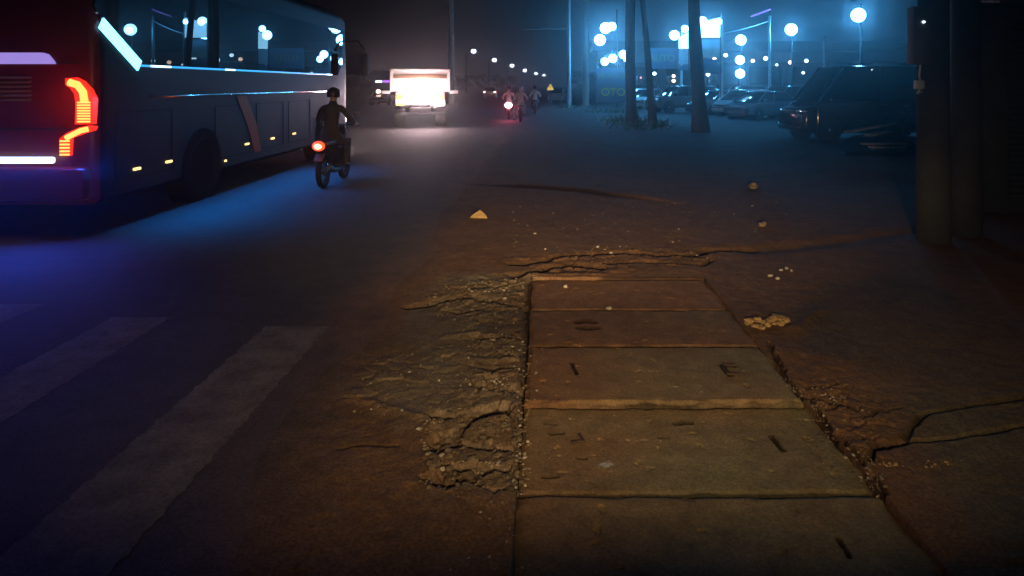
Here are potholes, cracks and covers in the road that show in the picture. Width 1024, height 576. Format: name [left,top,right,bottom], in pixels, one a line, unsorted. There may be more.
pothole [417,400,522,499]
crack [764,340,1024,499]
crack [398,246,760,502]
crack [336,441,403,452]
